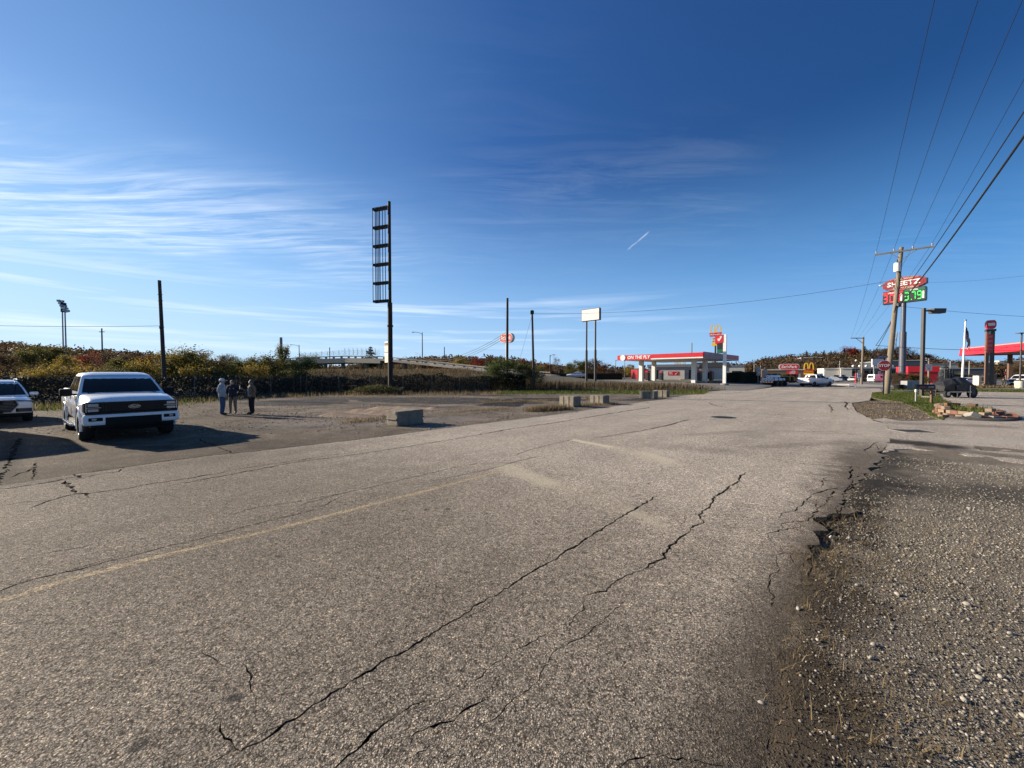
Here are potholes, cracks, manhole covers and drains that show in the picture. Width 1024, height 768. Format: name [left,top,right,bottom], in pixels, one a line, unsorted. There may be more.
crack [0,438,37,485]
crack [767,442,879,540]
crack [335,473,760,768]
